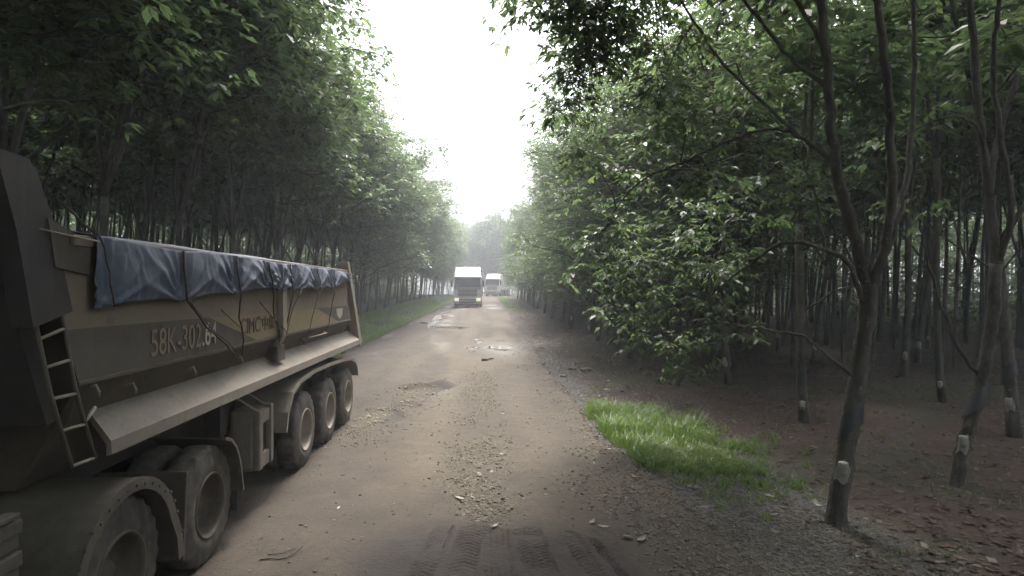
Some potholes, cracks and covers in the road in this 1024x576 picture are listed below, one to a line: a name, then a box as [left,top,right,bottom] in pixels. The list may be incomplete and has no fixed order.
pothole [392,379,457,405]
